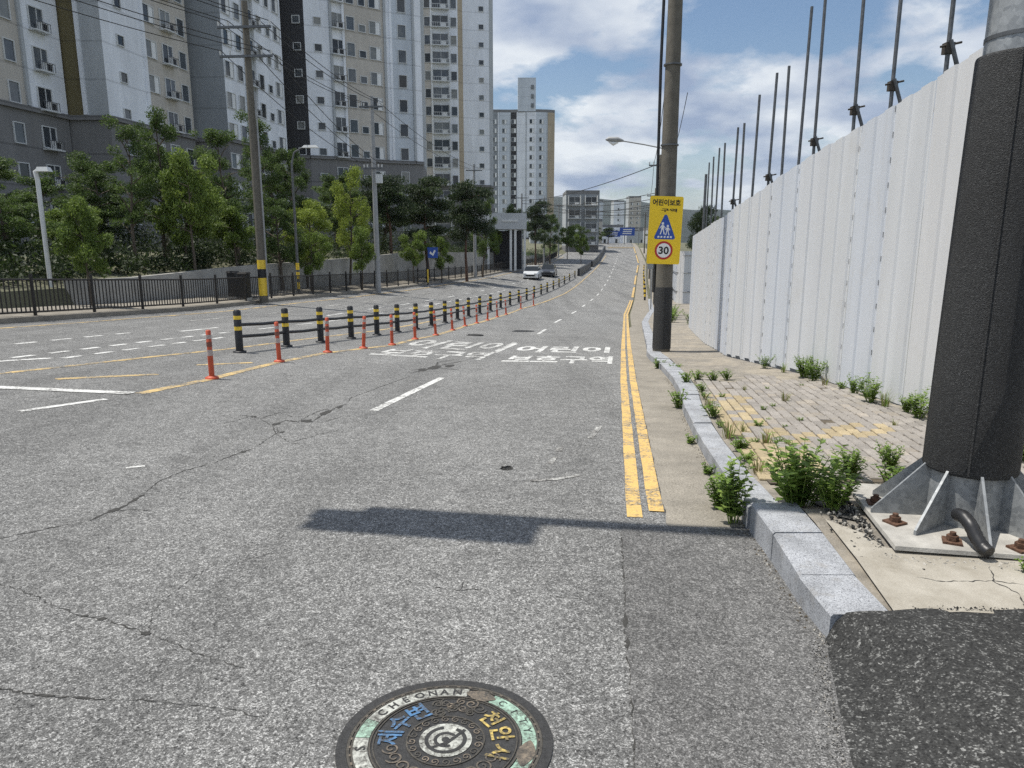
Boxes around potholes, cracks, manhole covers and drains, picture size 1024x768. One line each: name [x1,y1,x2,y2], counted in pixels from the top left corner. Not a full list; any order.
manhole cover [335,680,553,768]
crack [0,688,263,719]
crack [921,567,1024,605]
crack [0,550,280,670]
crack [3,355,484,538]
